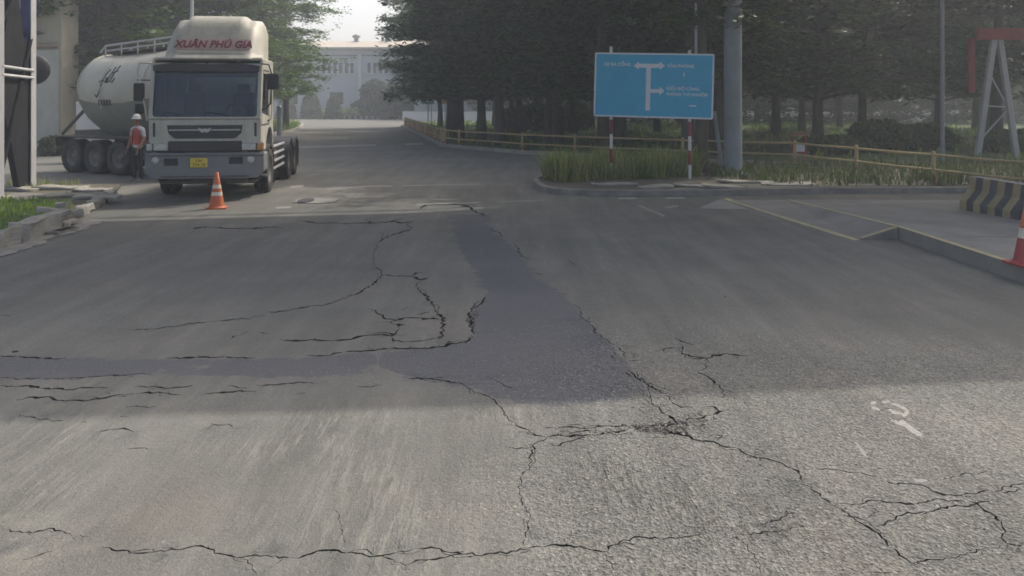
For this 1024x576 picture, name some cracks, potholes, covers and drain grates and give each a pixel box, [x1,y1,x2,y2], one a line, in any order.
crack [105,305,1023,575]
crack [1,351,61,359]
crack [135,204,543,357]
crack [8,525,86,538]
crack [0,356,313,449]
